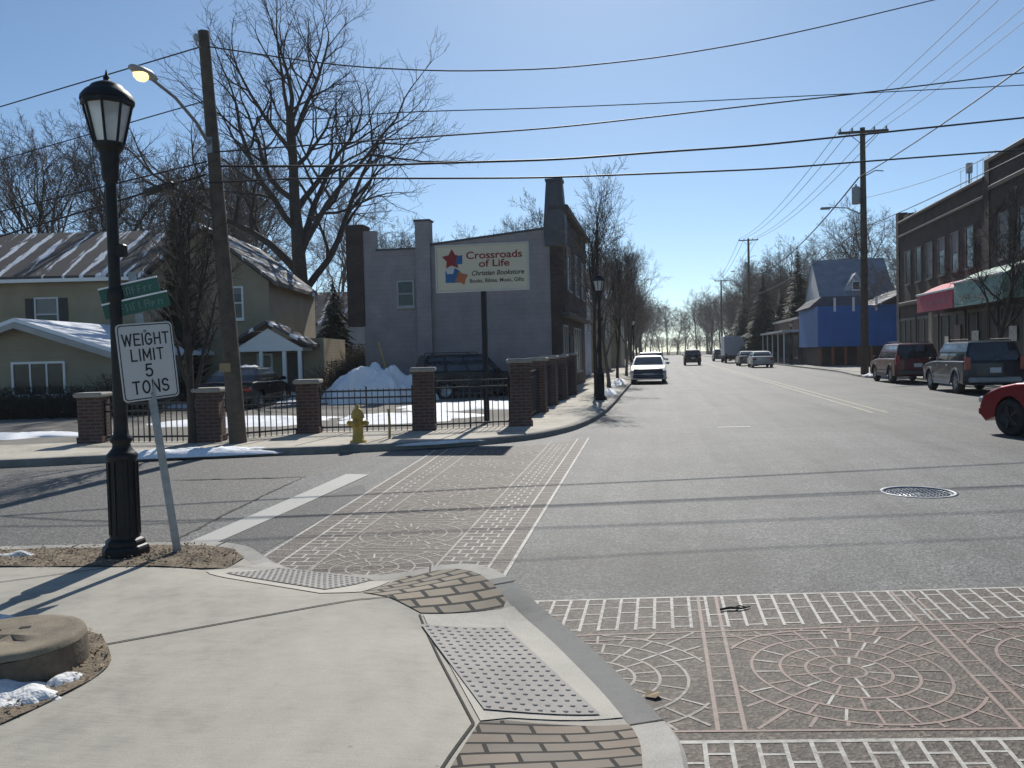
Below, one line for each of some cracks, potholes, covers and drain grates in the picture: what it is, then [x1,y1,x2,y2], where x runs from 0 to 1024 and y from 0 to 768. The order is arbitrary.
manhole cover [880,486,959,498]
